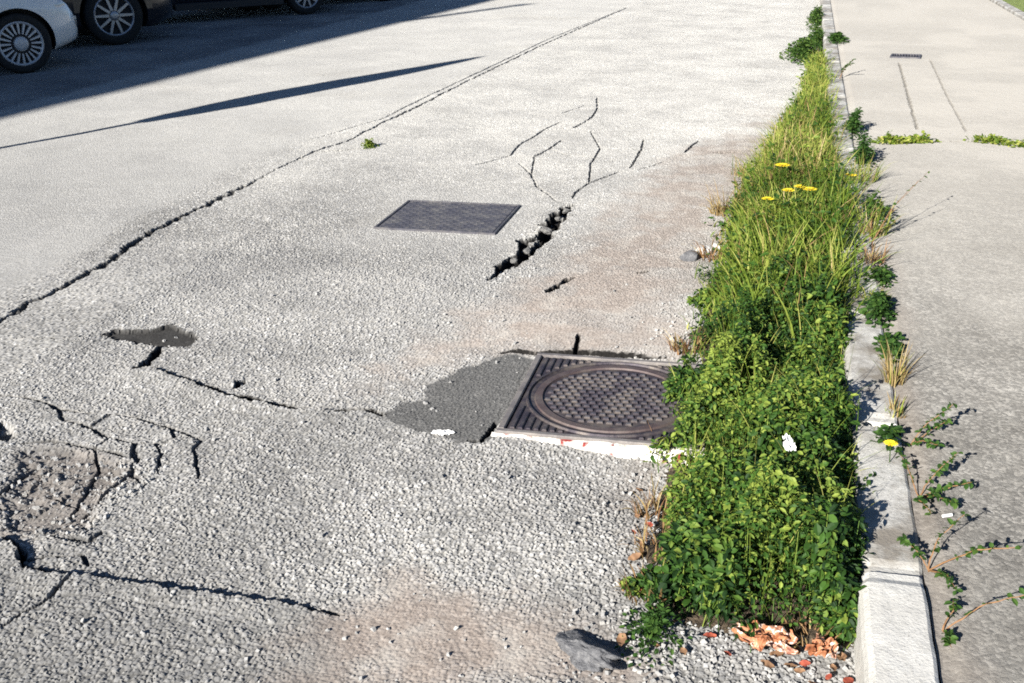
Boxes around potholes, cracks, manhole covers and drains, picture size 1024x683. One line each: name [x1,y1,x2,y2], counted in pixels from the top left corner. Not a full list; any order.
pothole [0,442,135,541]
crack [475,97,665,294]
manhole cover [373,200,521,235]
crack [0,346,388,628]
manhole cover [491,352,715,466]
